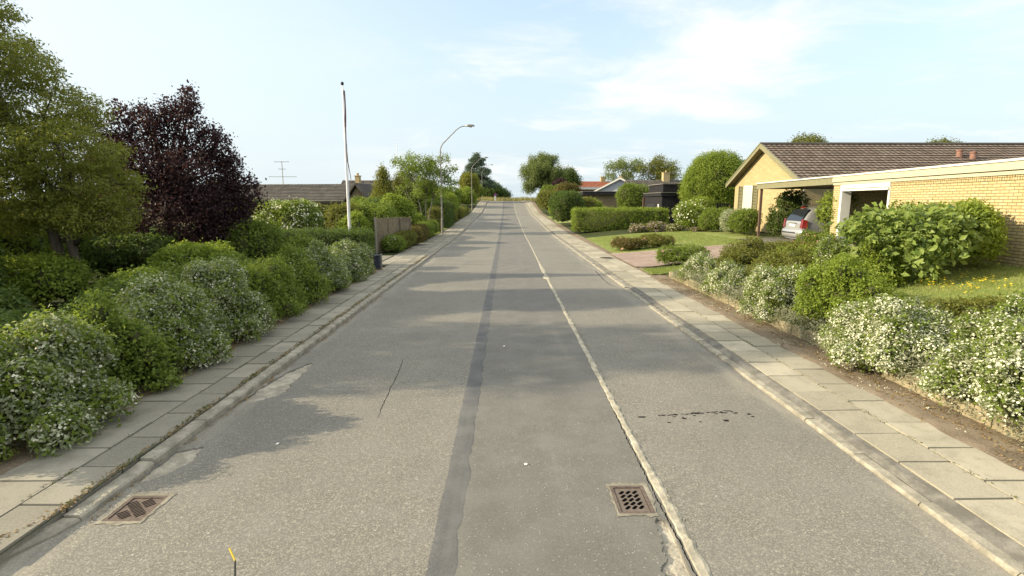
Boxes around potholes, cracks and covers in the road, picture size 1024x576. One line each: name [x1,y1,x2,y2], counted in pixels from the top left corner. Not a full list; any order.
drain grate [93,492,177,526]
drain grate [606,482,659,517]
